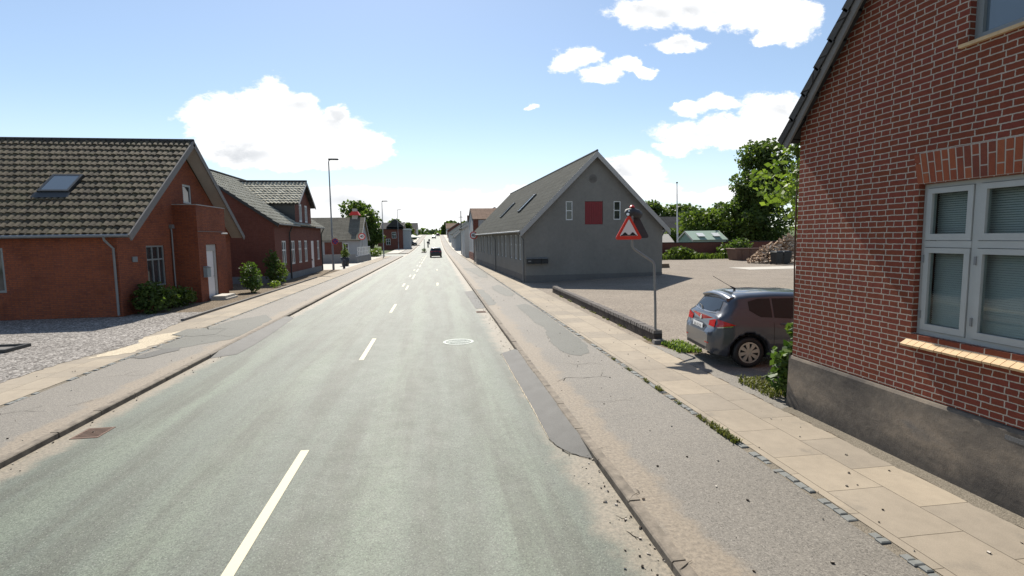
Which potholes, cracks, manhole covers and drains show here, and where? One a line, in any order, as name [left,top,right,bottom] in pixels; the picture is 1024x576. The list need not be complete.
drain grate [69,427,115,440]
